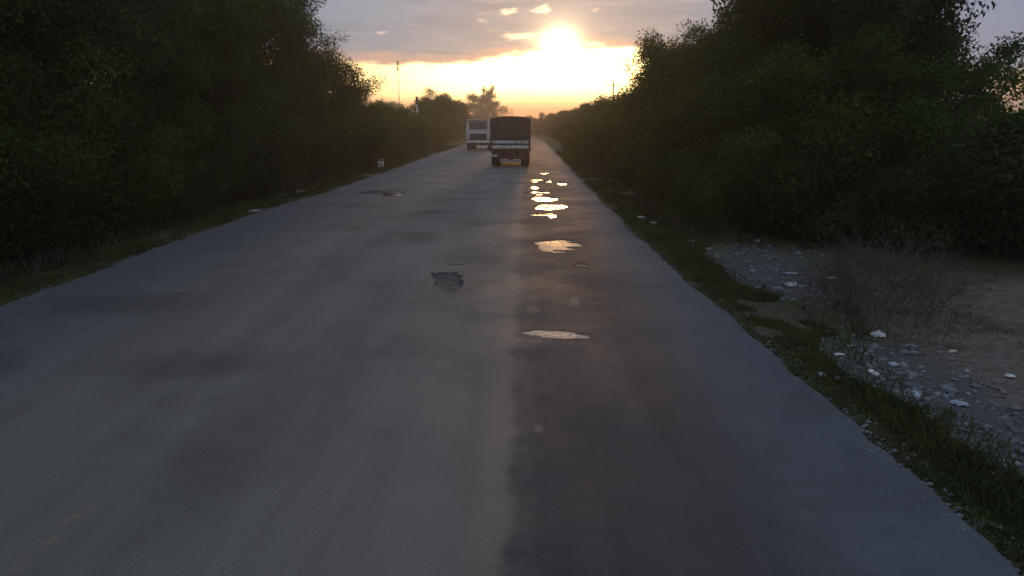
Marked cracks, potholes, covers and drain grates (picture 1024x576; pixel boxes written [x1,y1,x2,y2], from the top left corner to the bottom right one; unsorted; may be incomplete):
pothole [520,329,592,339]
pothole [534,239,583,253]
pothole [431,272,464,293]
